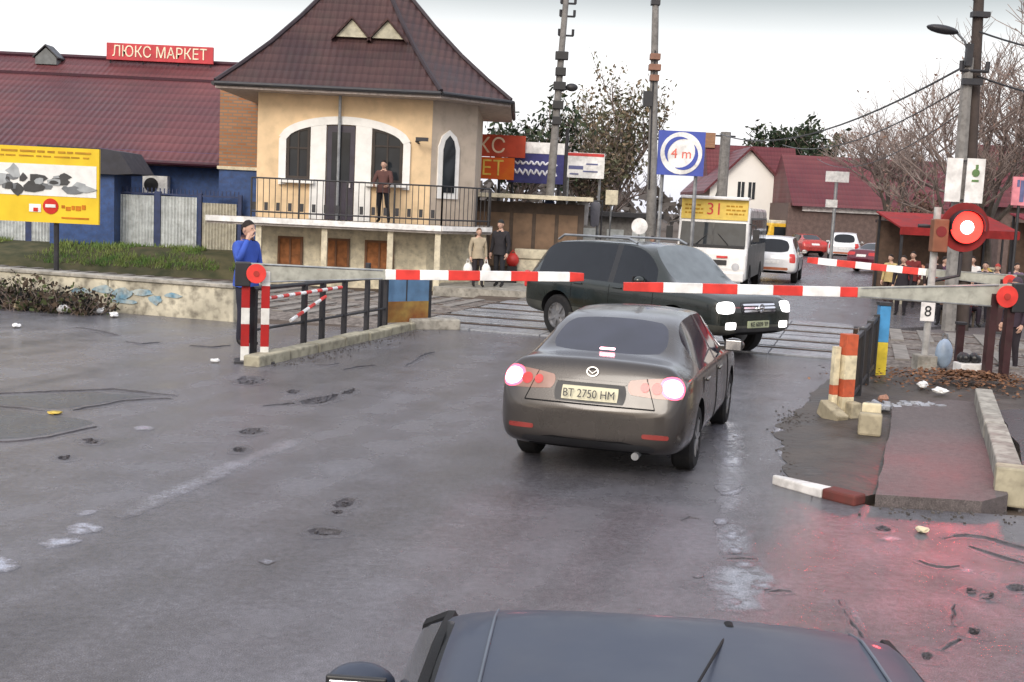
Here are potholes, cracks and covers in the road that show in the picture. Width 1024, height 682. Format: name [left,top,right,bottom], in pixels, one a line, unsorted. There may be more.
pothole [320,496,364,510]
pothole [964,590,1007,603]
pothole [228,427,273,437]
pothole [298,524,355,539]
pothole [227,445,258,454]
crack [403,351,438,367]
crack [911,531,1024,570]
pothole [49,454,83,462]
pothole [73,437,110,446]
pothole [229,375,272,386]
pothole [951,585,990,598]
